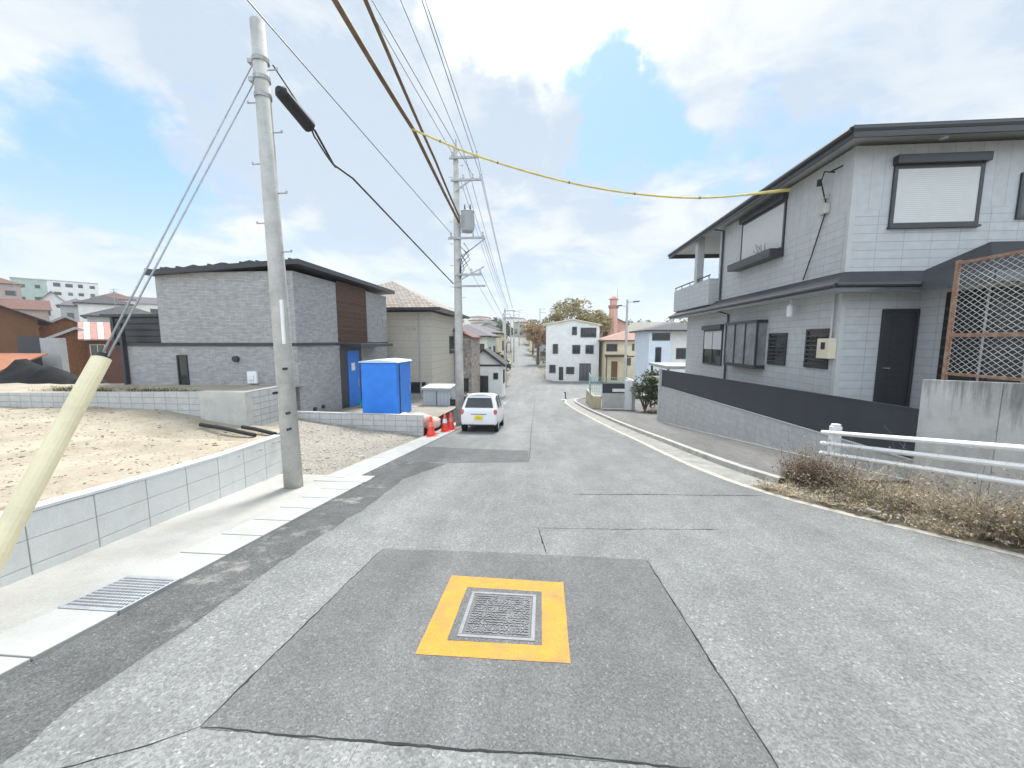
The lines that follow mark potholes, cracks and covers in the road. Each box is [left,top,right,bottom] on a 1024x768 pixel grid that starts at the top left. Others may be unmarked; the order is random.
drain grate [58,575,181,615]
manhole cover [415,575,571,663]
